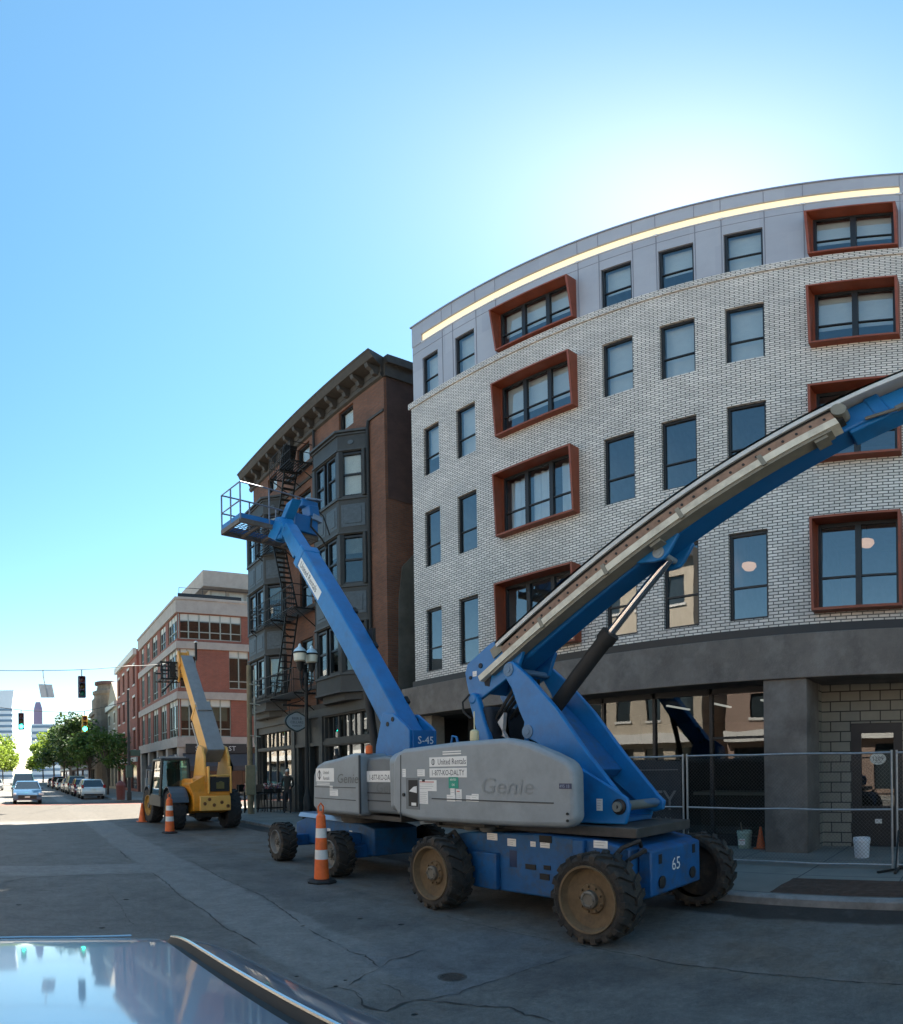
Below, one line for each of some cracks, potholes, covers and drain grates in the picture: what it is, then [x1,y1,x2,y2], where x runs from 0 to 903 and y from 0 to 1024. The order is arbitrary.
crack [326,949,570,1023]
manhole cover [437,972,467,982]
crack [410,905,902,985]
